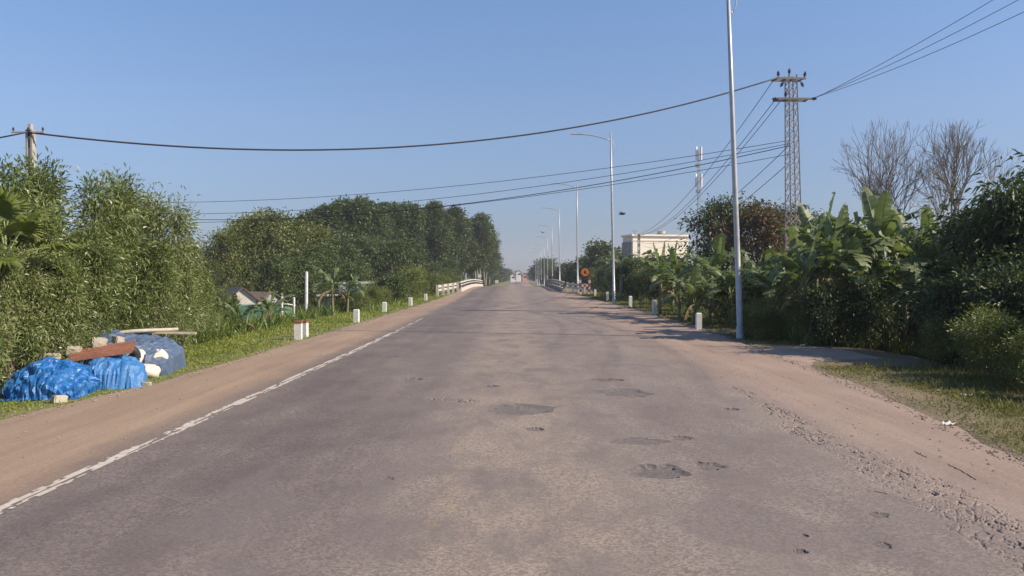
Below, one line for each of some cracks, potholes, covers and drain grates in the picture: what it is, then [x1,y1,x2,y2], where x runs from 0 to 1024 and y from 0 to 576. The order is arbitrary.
pothole [622,463,692,479]
pothole [592,388,655,397]
pothole [610,437,671,445]
pothole [691,461,729,470]
crack [729,385,1024,576]
pothole [487,403,557,415]
